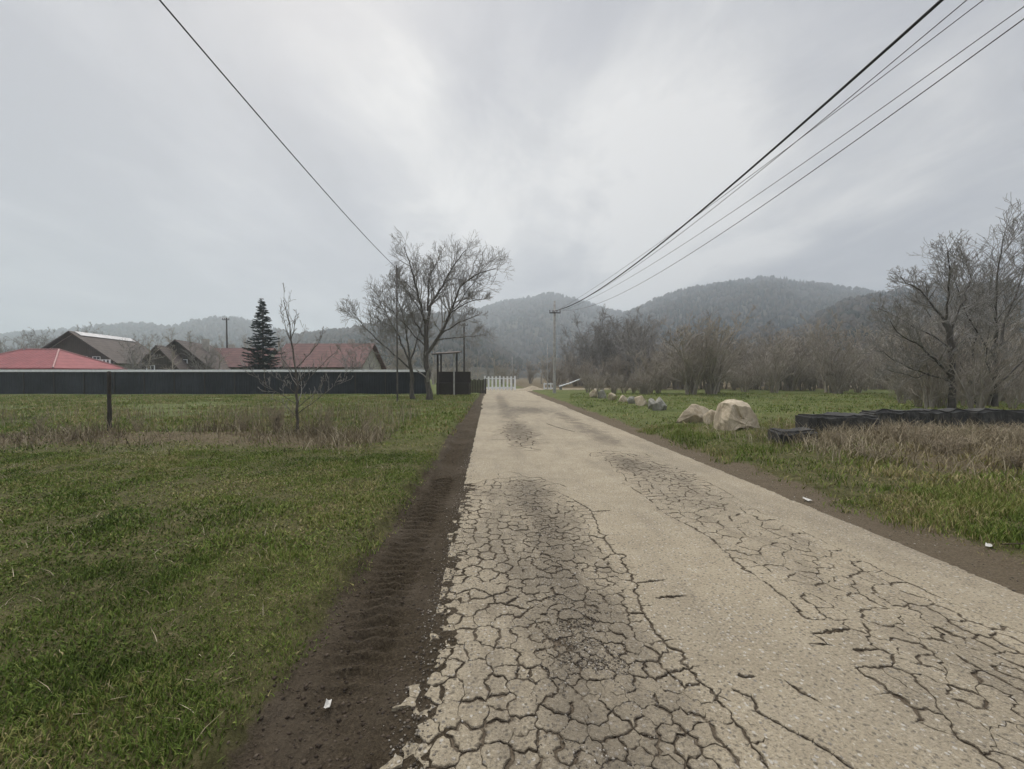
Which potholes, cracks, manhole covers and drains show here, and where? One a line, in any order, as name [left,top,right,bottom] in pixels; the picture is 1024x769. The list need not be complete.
crack [434,474,763,769]
crack [590,453,1024,766]
